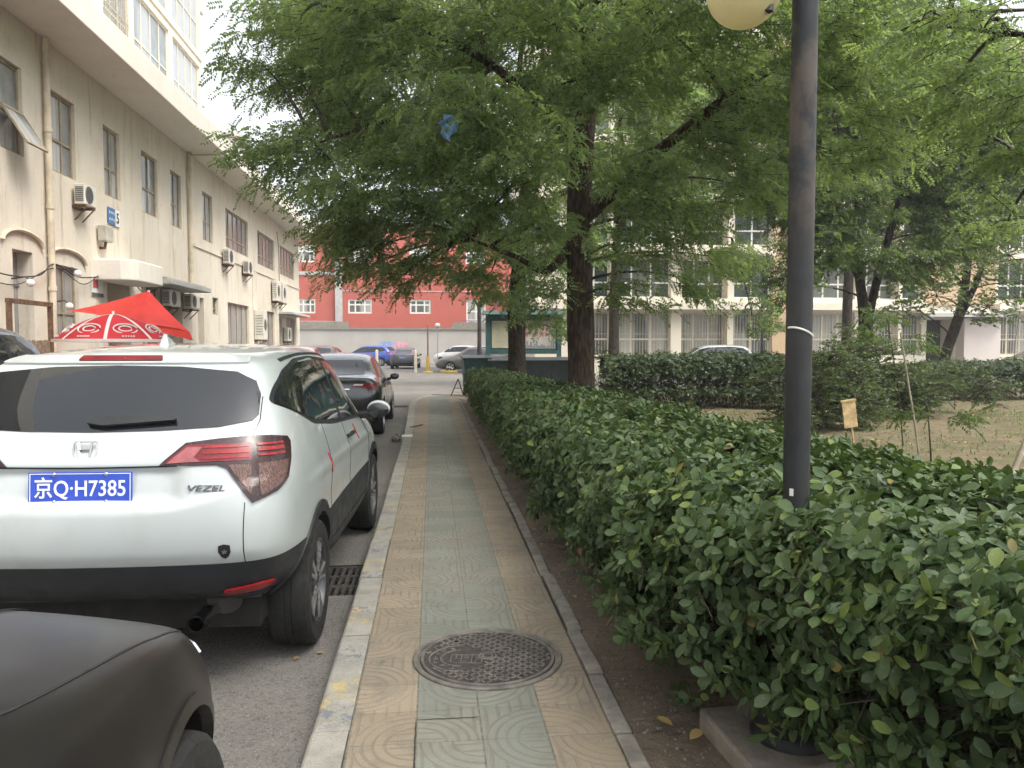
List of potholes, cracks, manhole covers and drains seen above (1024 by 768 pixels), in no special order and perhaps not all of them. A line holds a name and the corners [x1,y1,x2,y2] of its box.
manhole cover [413,628,562,691]
drain grate [329,565,363,596]
